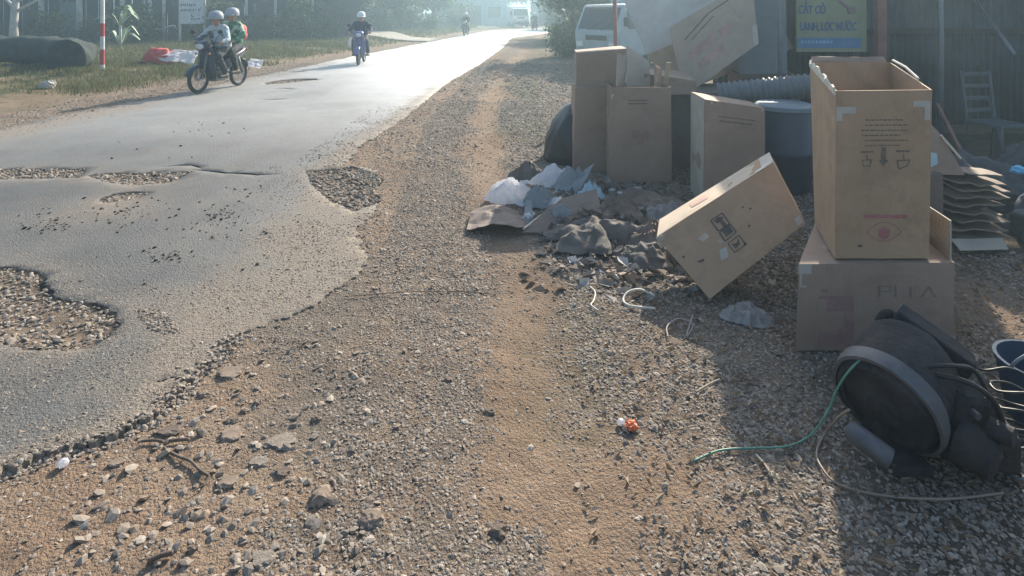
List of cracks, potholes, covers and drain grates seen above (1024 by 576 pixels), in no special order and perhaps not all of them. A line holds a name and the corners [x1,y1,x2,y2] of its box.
pothole [90,171,192,185]
pothole [100,192,150,203]
pothole [305,166,383,211]
pothole [0,168,86,180]
crack [167,165,256,175]
pothole [0,266,121,351]
